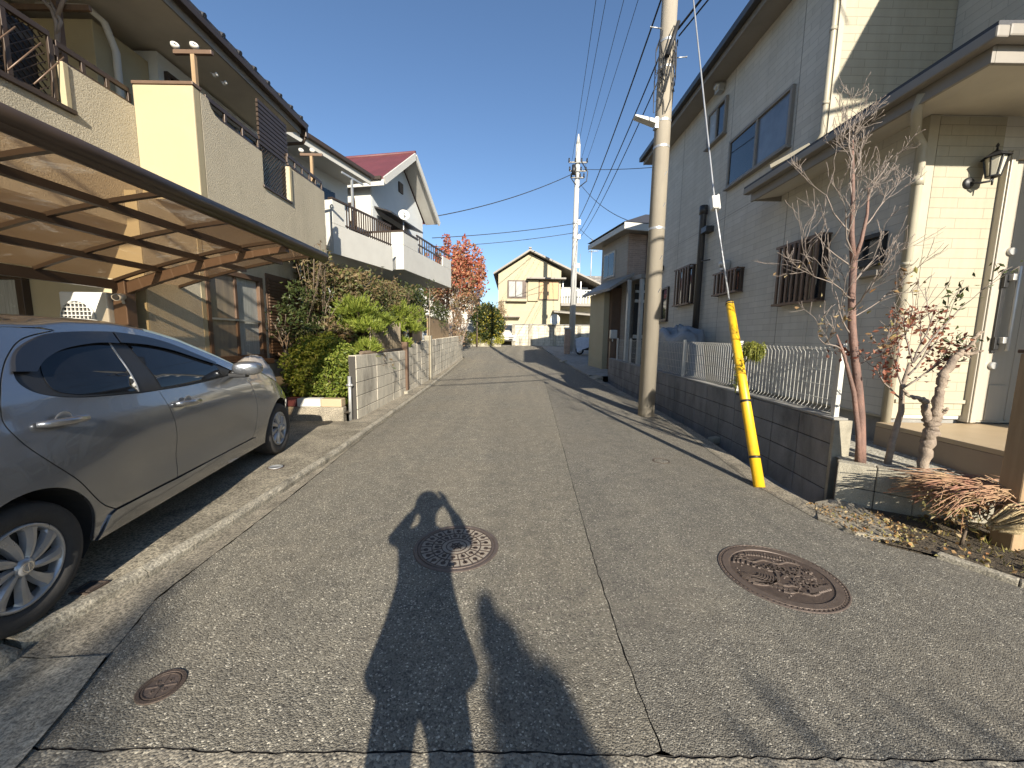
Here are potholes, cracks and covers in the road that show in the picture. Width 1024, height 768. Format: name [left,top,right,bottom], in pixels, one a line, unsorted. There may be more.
manhole cover [413,526,498,573]
crack [32,368,1024,763]
manhole cover [718,545,852,614]
utility cover [134,669,188,705]
